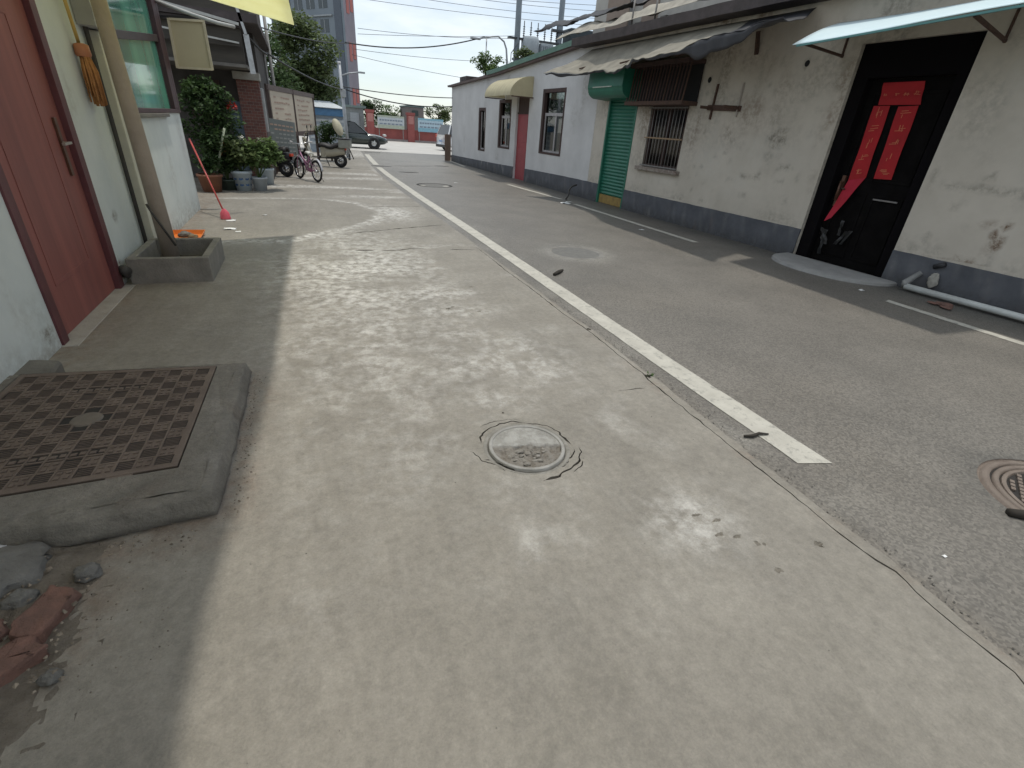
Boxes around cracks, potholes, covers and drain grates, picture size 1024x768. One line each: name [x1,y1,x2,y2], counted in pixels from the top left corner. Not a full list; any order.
manhole cover [0,363,252,547]
manhole cover [977,459,1024,510]
manhole cover [483,424,570,475]
manhole cover [546,246,605,260]
